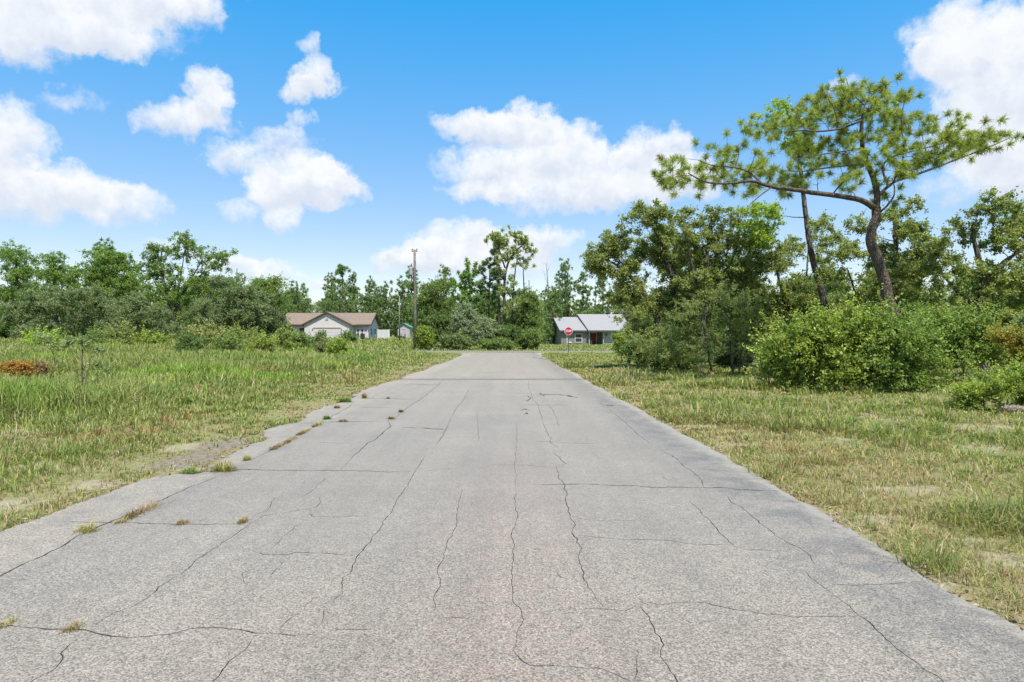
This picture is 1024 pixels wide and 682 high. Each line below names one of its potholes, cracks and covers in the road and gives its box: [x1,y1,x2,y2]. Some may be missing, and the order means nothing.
crack [2,381,944,682]
